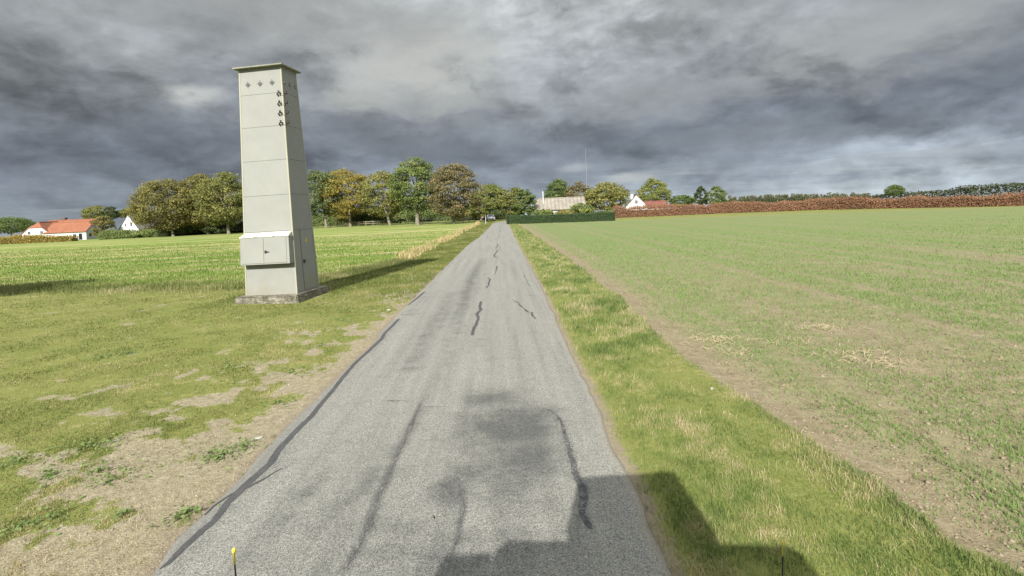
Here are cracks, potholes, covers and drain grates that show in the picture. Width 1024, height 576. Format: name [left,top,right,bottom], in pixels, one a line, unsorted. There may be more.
crack [343,400,436,569]
crack [543,408,593,529]
